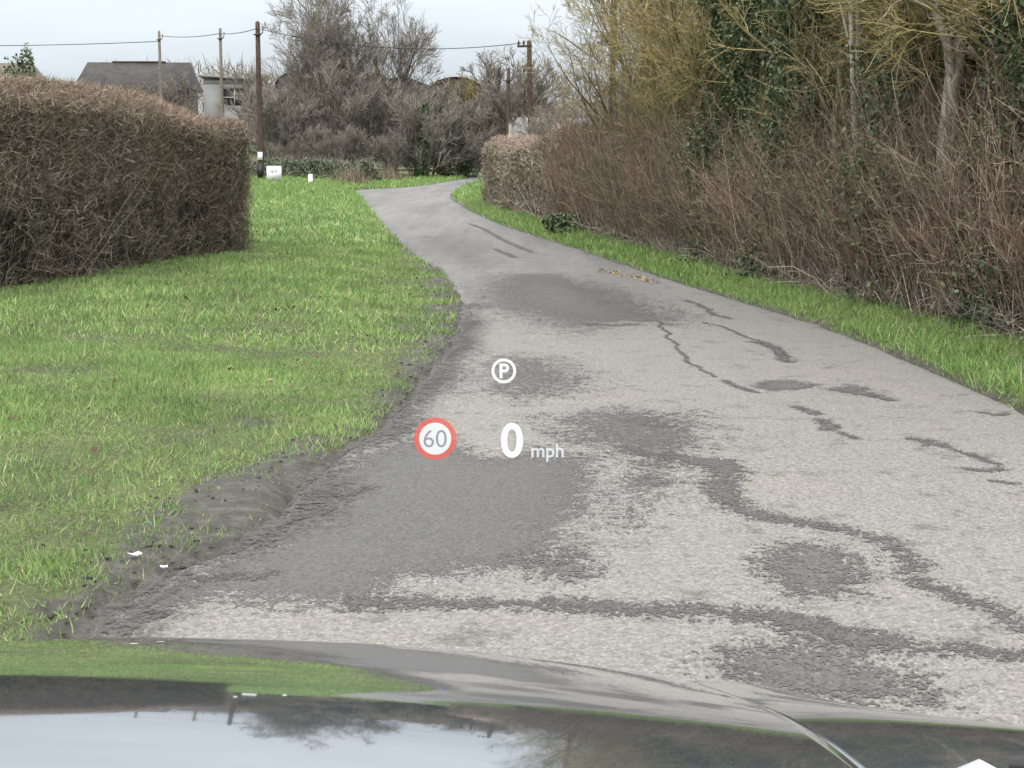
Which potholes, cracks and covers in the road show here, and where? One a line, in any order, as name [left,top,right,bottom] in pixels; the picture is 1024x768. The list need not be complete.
crack [329,405,1024,664]
crack [577,300,796,393]
